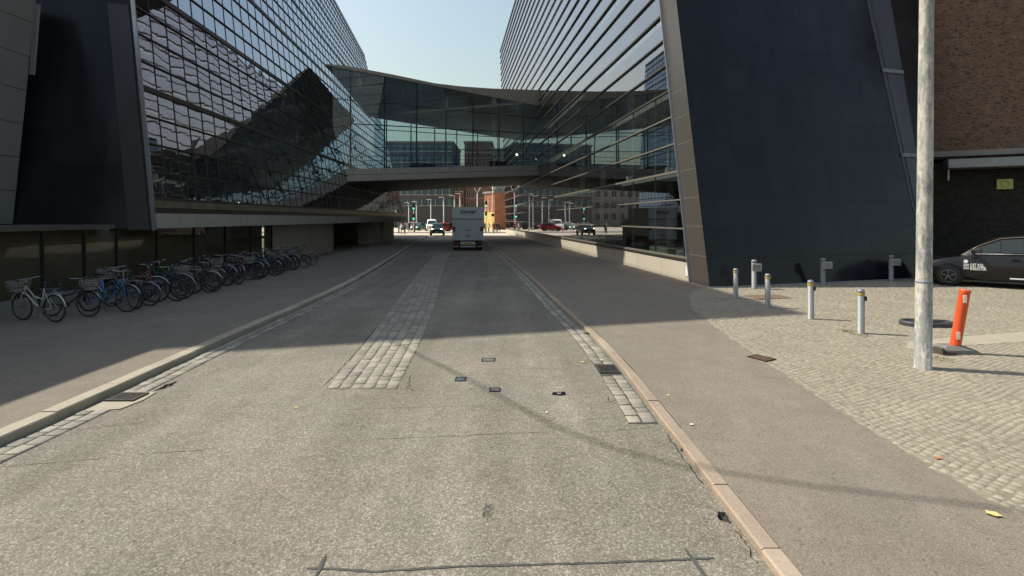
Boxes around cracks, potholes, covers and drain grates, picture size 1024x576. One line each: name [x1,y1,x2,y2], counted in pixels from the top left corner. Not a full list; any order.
drain grate [104,392,149,402]
manhole cover [747,354,776,362]
pothole [482,502,495,522]
crack [368,431,557,440]
pothole [717,511,732,524]
drain grate [595,365,621,374]
